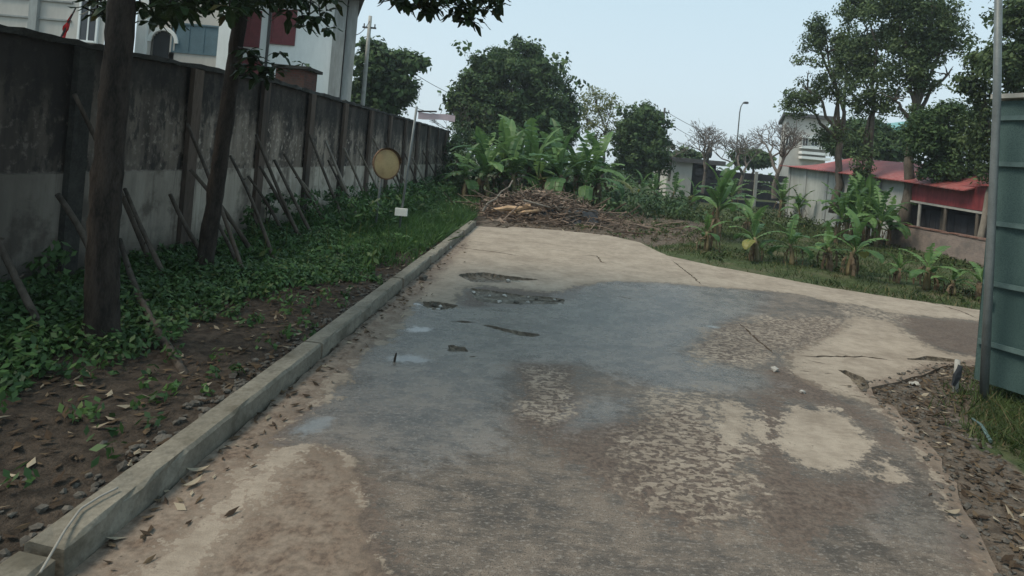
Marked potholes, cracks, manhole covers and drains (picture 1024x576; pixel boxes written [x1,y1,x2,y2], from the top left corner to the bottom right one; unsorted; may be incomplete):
pothole [459,272,538,283]
pothole [483,325,540,337]
pothole [837,369,869,392]
pothole [470,288,565,305]
crack [800,355,892,398]
pothole [423,301,458,310]
crack [736,322,777,355]
